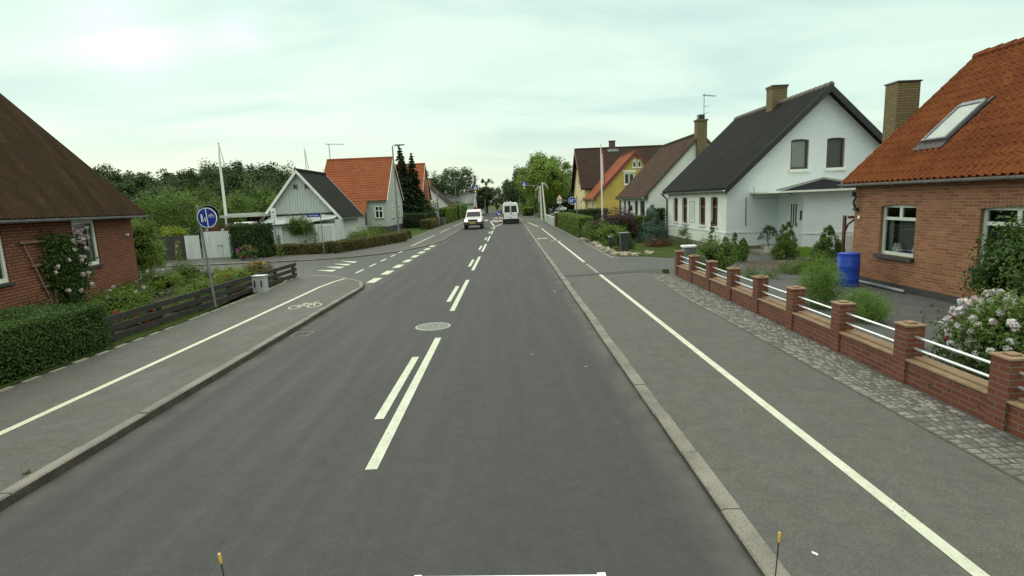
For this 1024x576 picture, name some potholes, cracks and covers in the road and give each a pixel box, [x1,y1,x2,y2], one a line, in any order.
manhole cover [415,322,451,331]
